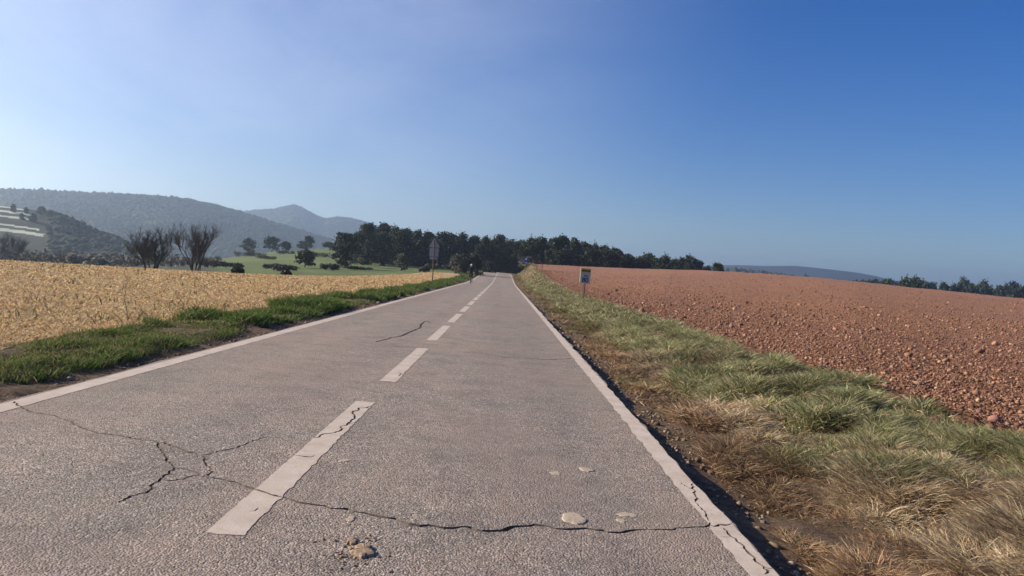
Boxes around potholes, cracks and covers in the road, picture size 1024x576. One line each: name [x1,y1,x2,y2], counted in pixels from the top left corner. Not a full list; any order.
crack [13,402,775,574]
crack [376,321,430,348]
